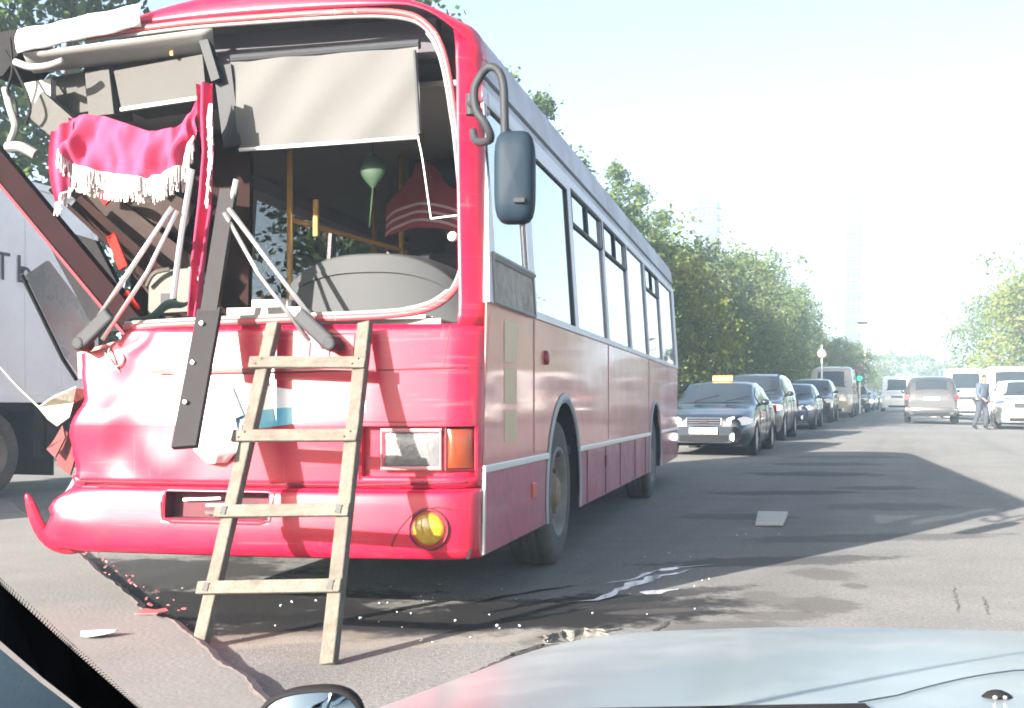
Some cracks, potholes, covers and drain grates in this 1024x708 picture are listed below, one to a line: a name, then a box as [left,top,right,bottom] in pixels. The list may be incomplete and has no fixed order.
pothole [541,628,612,645]
